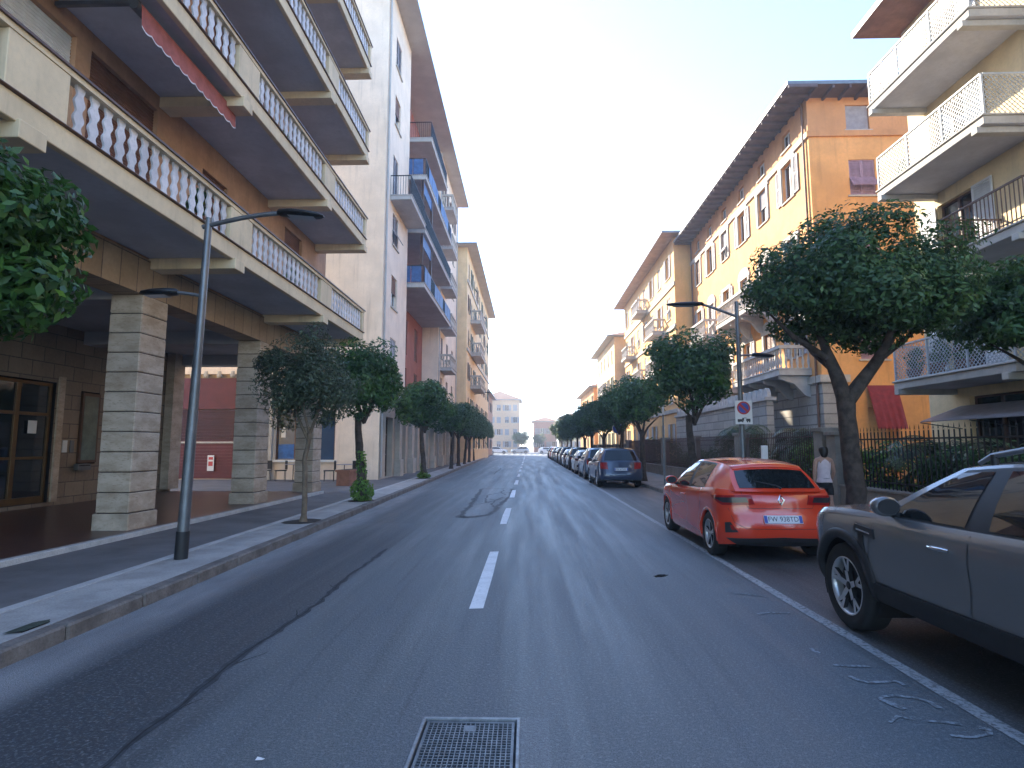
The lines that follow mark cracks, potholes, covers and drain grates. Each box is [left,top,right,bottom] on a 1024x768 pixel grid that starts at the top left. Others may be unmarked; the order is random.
crack [455,468,514,518]
crack [98,549,387,768]
